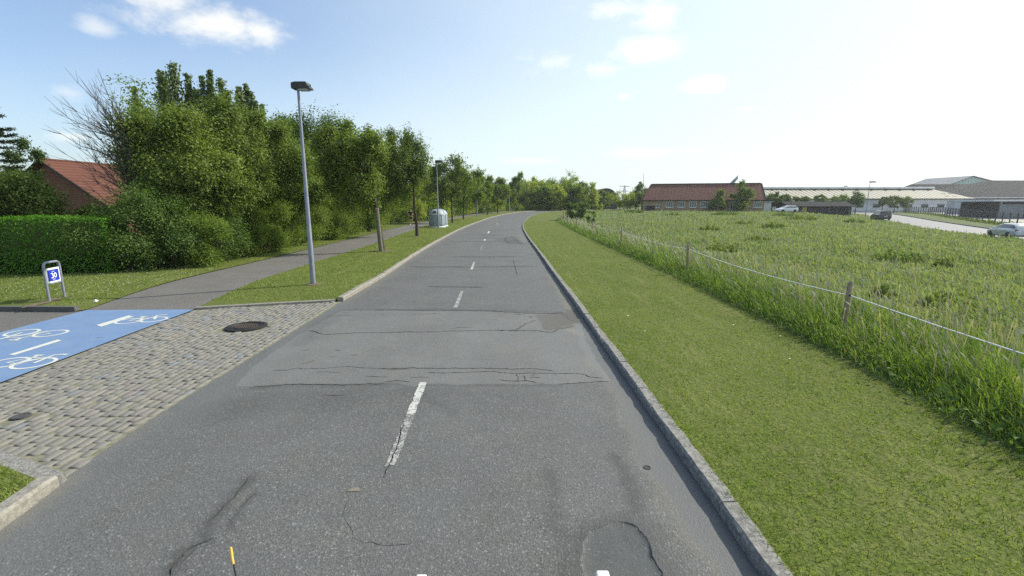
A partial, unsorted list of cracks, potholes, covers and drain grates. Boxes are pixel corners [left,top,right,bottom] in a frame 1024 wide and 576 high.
manhole cover [224,321,268,332]
crack [383,425,404,477]
crack [307,314,573,335]
crack [253,356,608,396]
crack [169,479,252,576]
utility cover [10,412,32,421]
